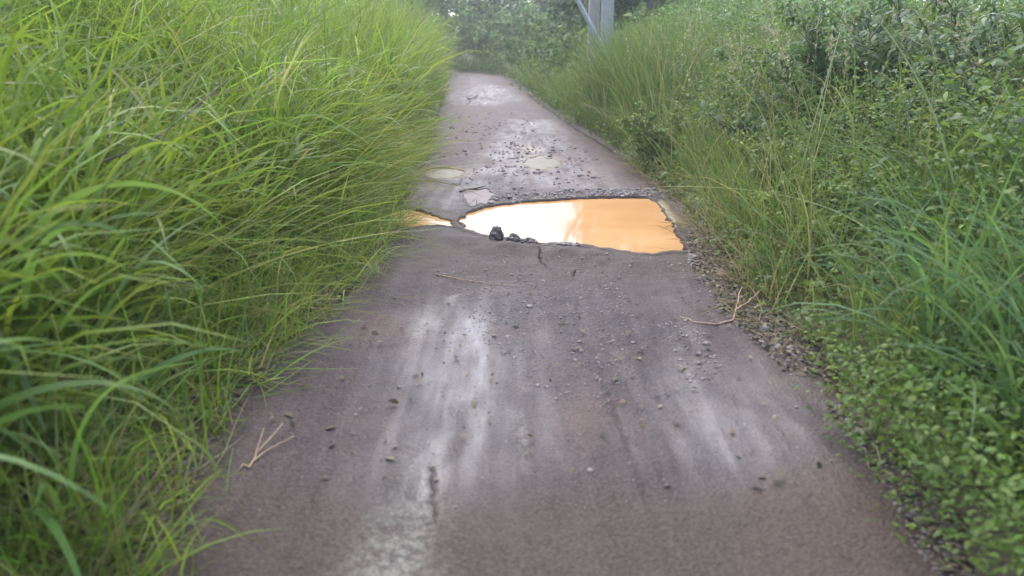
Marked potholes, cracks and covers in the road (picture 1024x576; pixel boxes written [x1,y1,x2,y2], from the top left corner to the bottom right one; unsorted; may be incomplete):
pothole [420,167,468,179]
crack [419,465,446,525]
pothole [389,207,467,229]
crack [533,242,584,281]
